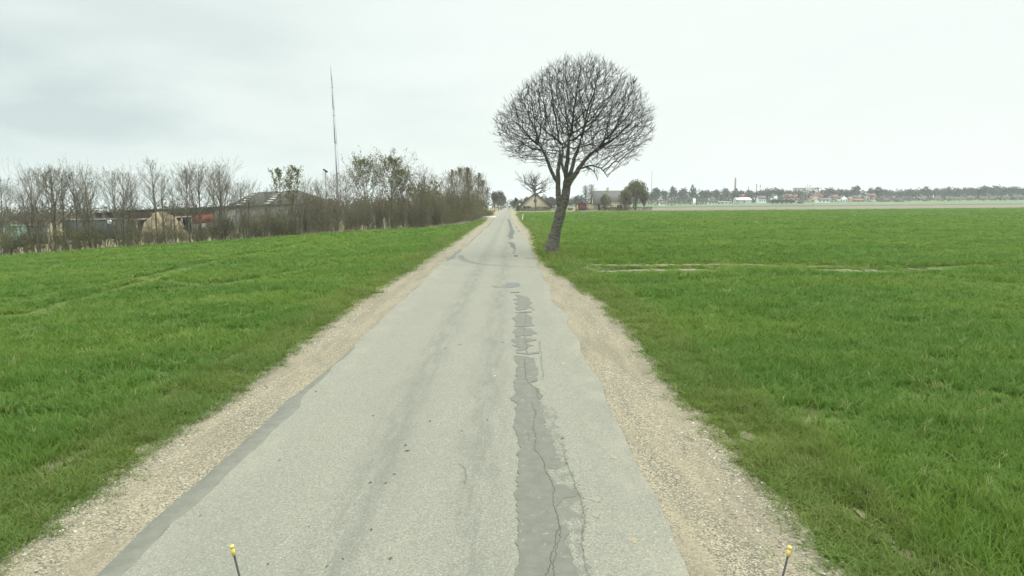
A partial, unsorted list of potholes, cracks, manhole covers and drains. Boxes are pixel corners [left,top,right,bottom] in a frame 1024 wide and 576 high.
crack [523,315,590,576]
